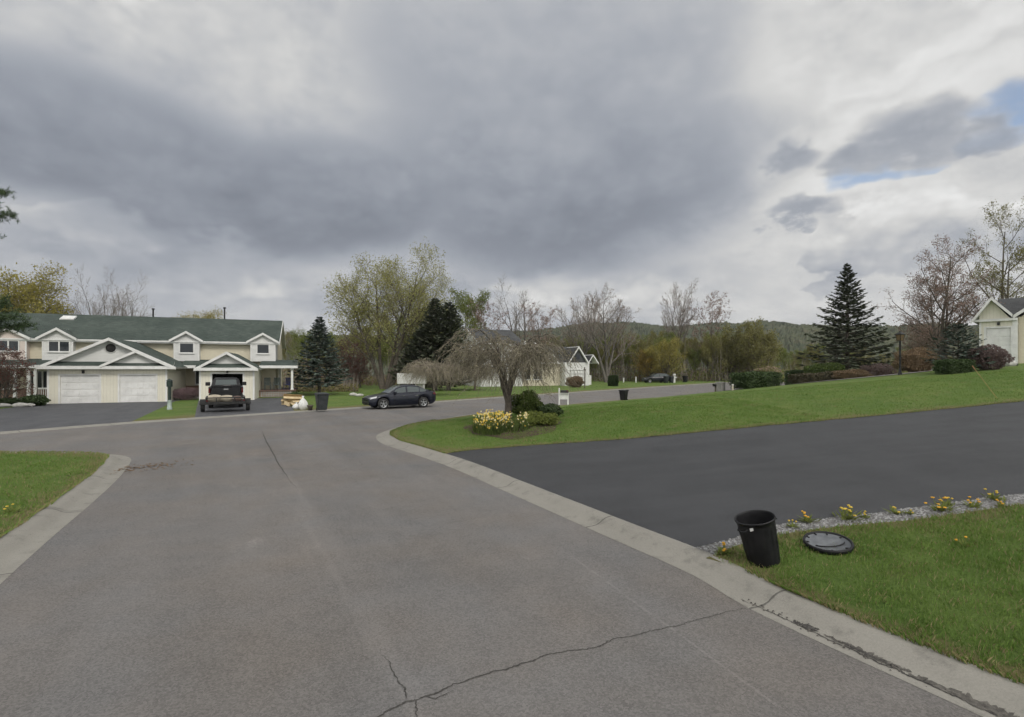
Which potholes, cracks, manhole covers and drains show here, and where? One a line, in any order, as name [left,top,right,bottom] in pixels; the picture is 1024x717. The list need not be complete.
crack [377,599,1019,717]
